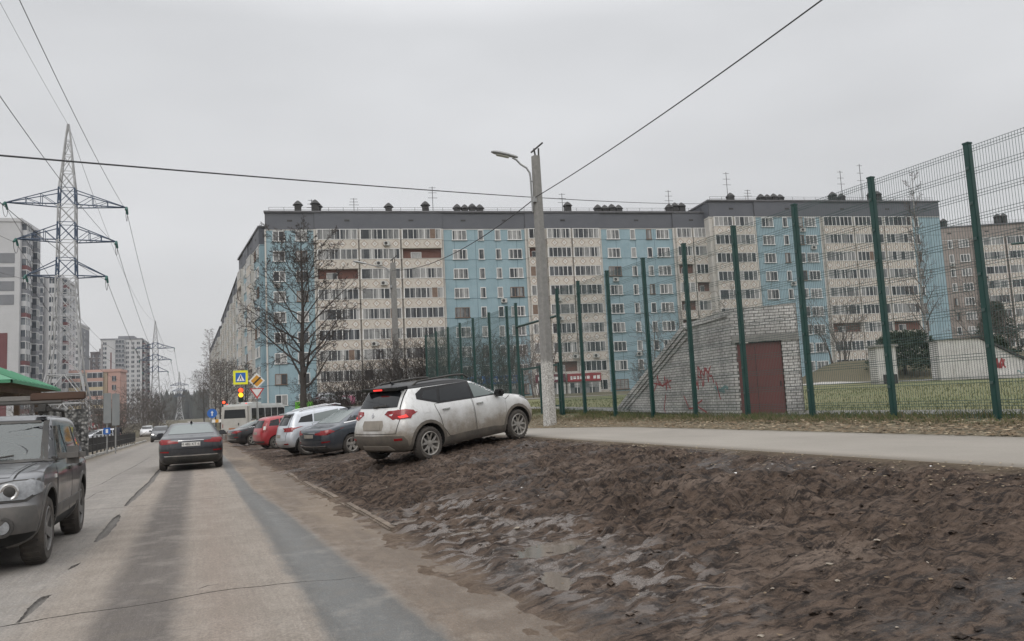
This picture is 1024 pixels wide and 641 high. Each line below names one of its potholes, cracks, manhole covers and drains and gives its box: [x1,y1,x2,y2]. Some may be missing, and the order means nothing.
crack [1,576,361,627]
